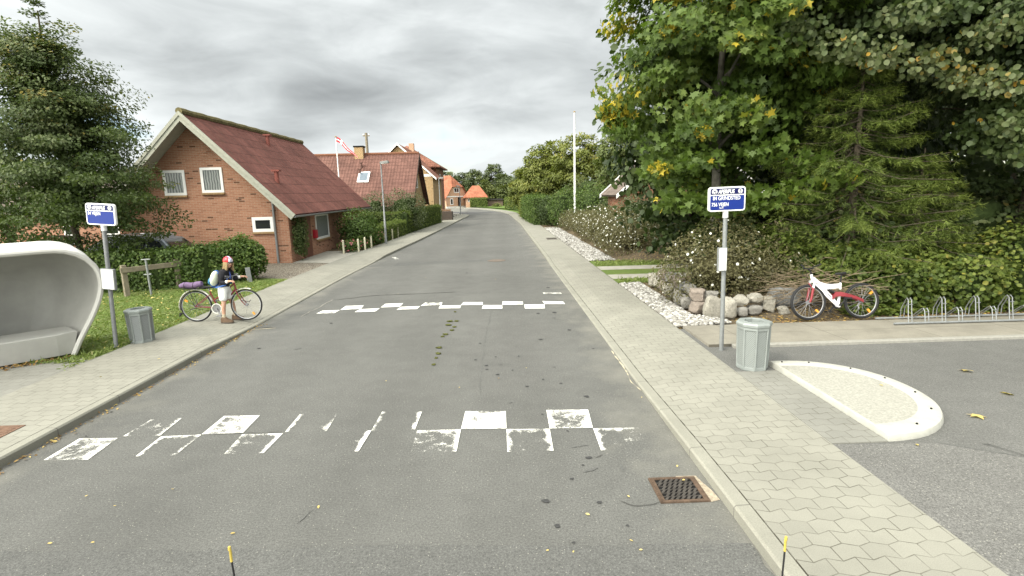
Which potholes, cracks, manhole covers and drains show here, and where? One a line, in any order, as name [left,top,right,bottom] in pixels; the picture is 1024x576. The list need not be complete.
drain grate [648,476,720,504]
manhole cover [0,425,26,438]
